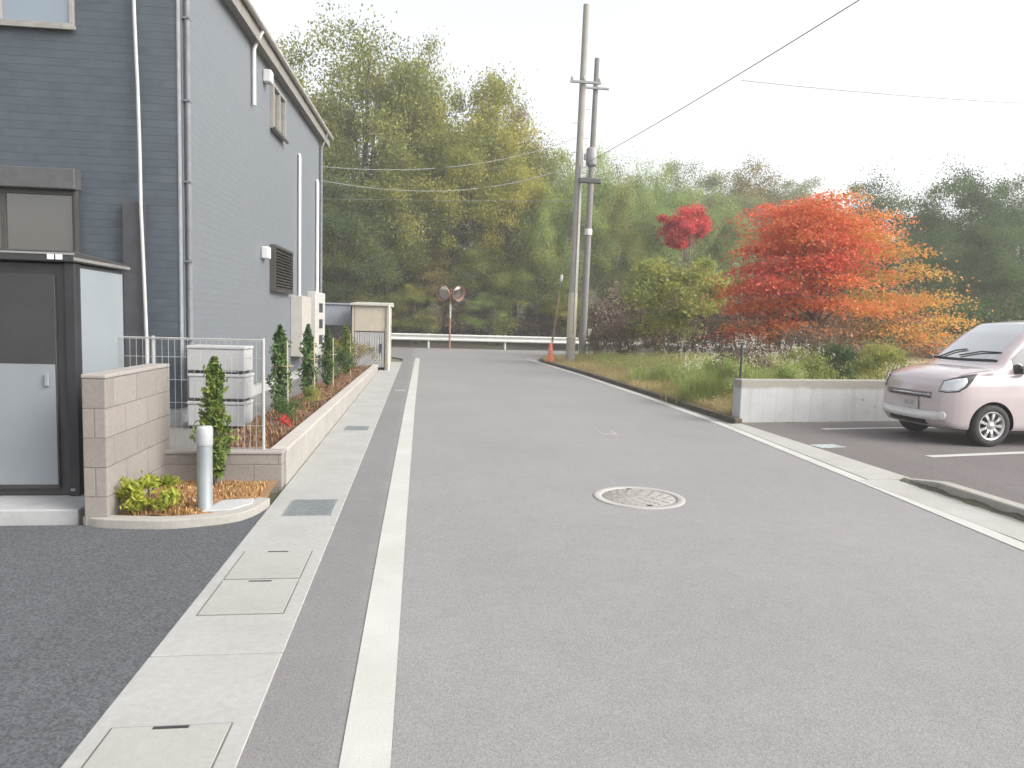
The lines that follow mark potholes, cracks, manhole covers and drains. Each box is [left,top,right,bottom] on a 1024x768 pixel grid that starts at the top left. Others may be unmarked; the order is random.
manhole cover [593,486,685,509]
drain grate [282,499,338,516]
